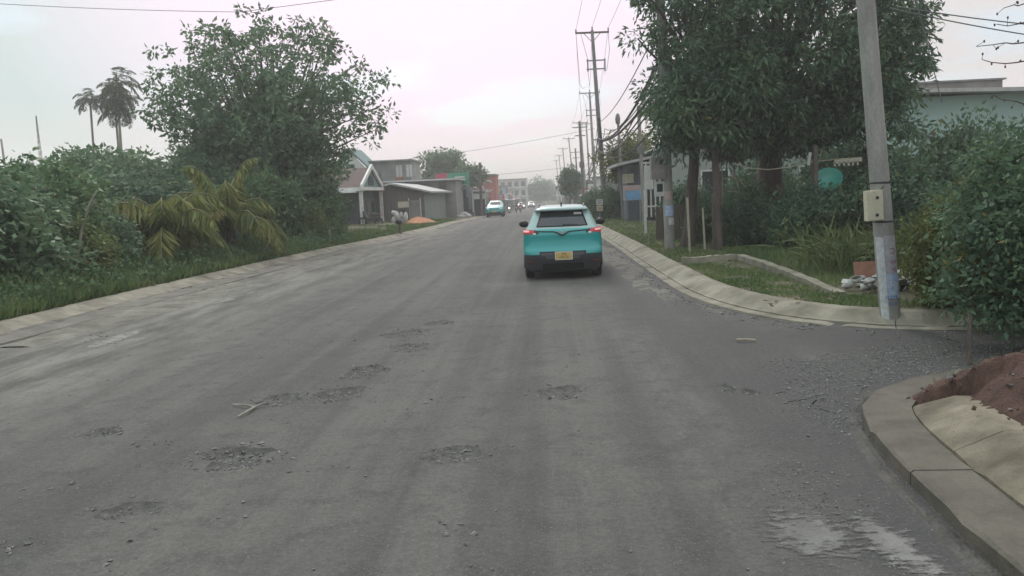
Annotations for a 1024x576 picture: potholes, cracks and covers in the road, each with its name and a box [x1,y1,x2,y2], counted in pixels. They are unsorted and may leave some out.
pothole [73,424,125,439]
pothole [250,392,315,407]
pothole [337,362,396,379]
pothole [305,383,371,404]
pothole [384,343,440,353]
pothole [181,440,289,473]
pothole [413,445,496,467]
pothole [525,384,590,401]
pothole [92,498,168,523]
pothole [376,328,433,339]
